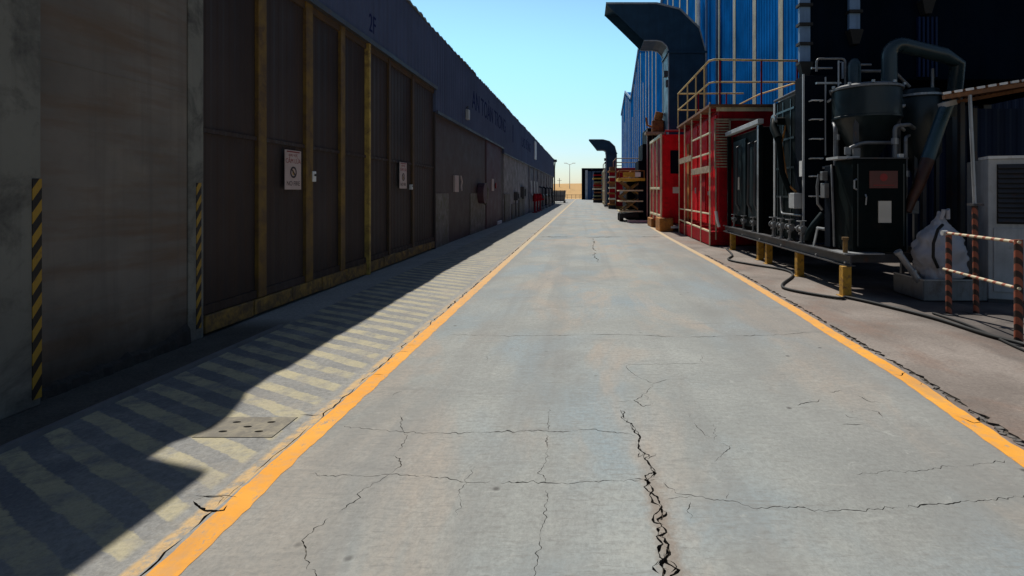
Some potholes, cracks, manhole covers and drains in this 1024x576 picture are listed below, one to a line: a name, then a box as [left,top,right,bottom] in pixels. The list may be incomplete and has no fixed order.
crack [193,495,233,512]
crack [301,358,1024,576]
manhole cover [192,417,298,438]
